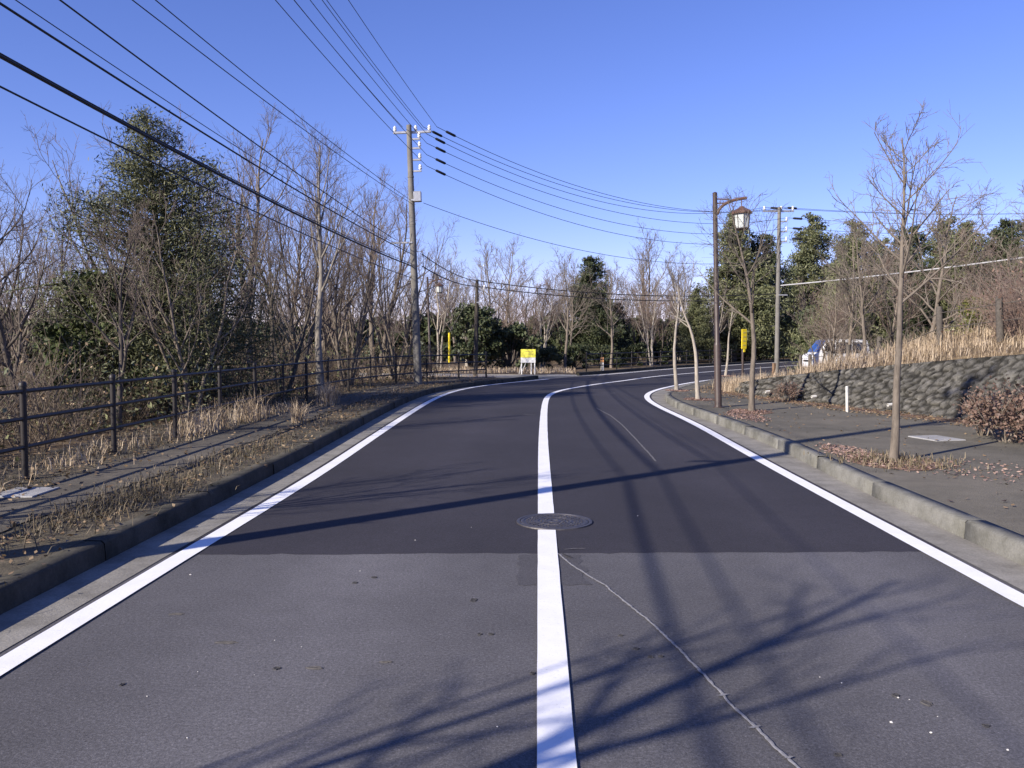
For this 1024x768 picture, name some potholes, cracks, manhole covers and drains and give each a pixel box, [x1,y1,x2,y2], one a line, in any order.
crack [597,408,657,461]
manhole cover [516,513,592,530]
crack [558,548,800,768]
